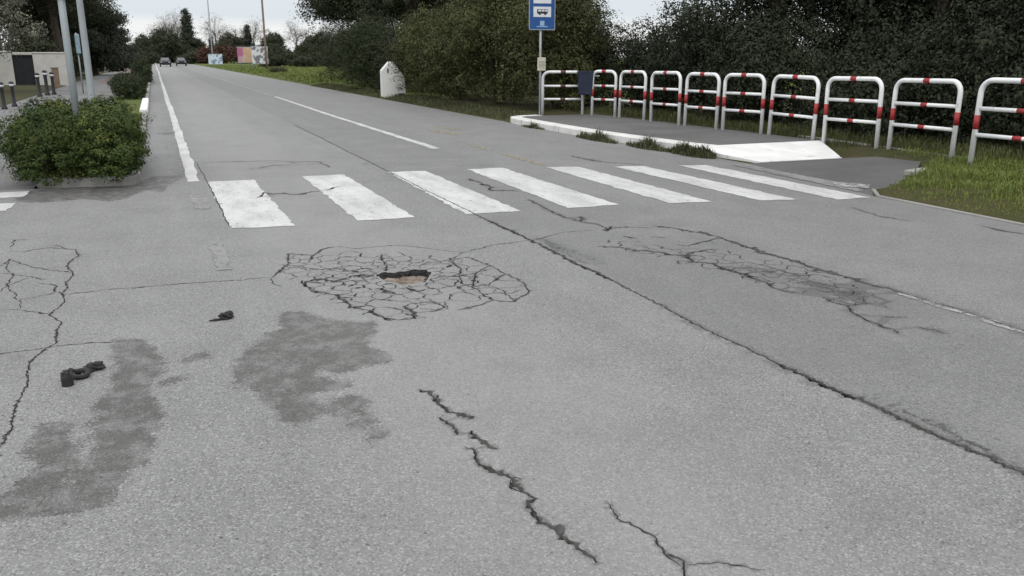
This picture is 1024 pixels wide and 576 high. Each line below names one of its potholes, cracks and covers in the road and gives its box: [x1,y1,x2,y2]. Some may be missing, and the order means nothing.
crack [419,389,760,576]
crack [0,179,1024,456]
pothole [376,269,431,287]
